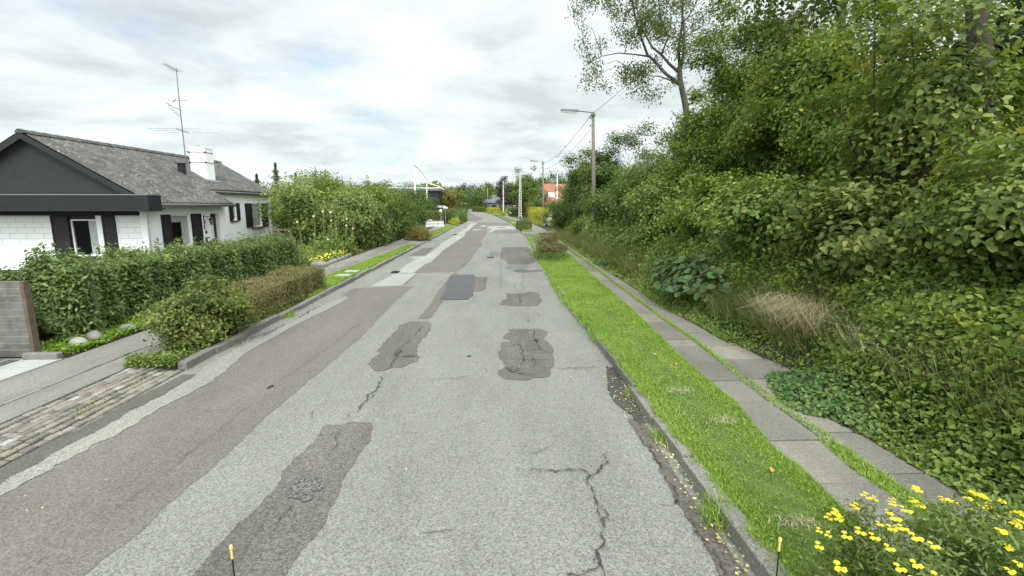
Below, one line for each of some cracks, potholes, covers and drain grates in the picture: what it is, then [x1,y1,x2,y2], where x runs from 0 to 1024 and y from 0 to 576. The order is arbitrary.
pothole [286,477,324,502]
crack [311,325,423,459]
crack [524,447,609,576]
crack [639,436,726,576]
